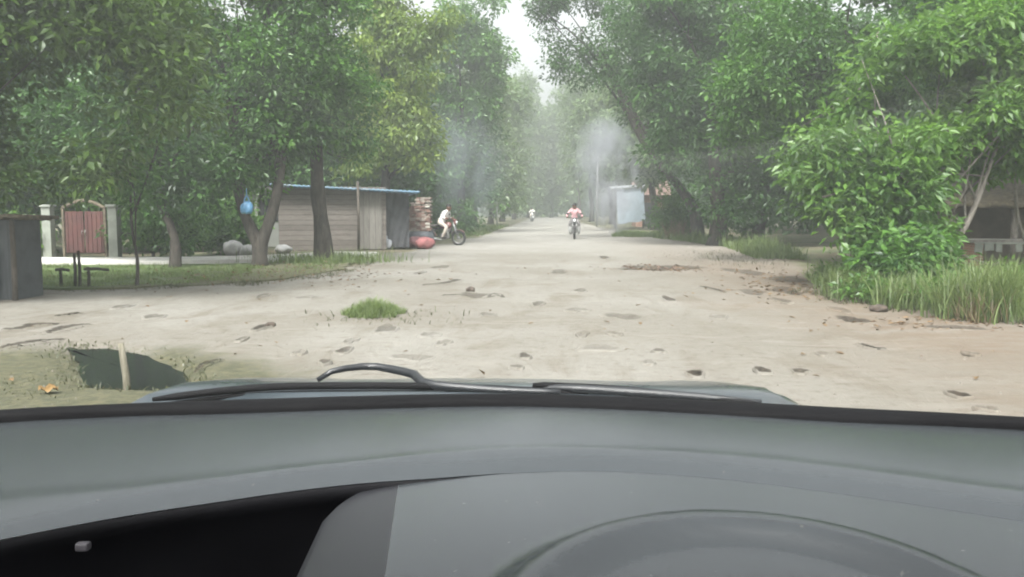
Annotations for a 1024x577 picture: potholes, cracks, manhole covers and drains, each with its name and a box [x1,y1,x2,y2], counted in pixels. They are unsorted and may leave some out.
pothole [943,389,975,399]
pothole [752,365,774,375]
